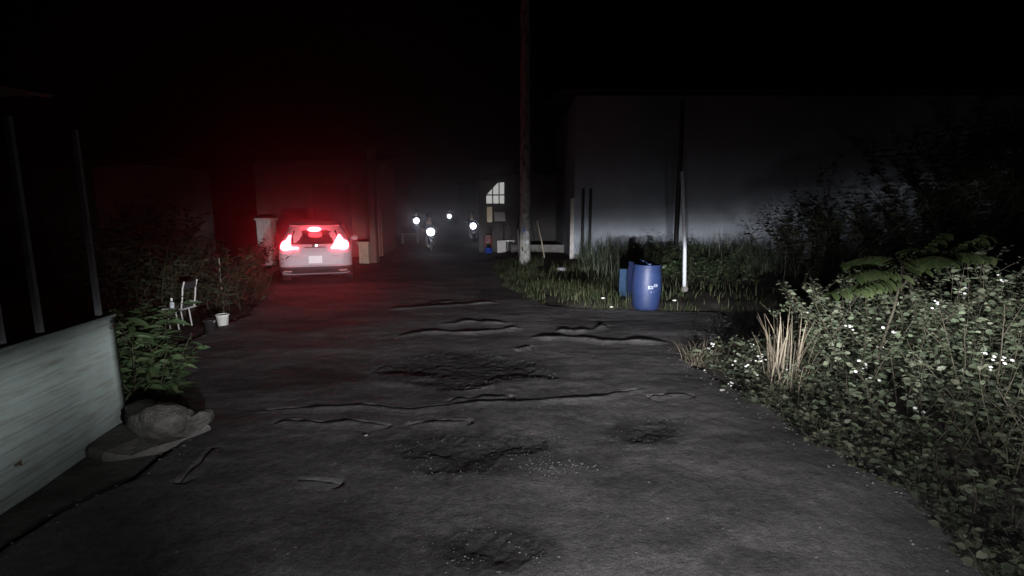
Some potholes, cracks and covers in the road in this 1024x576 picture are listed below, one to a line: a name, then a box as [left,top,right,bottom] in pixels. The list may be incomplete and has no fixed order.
pothole [368,350,561,392]
crack [252,387,694,431]
pothole [389,432,552,478]
crack [389,301,670,352]
crack [293,474,343,491]
crack [173,447,226,483]
pothole [614,417,682,446]
pothole [438,528,546,575]
